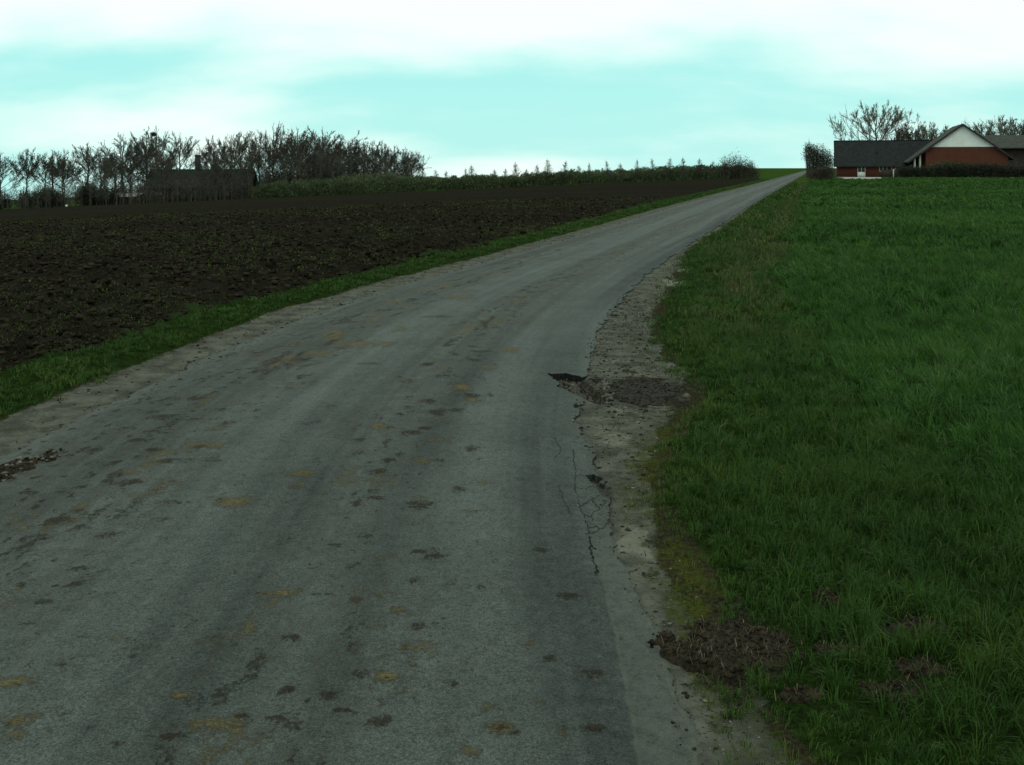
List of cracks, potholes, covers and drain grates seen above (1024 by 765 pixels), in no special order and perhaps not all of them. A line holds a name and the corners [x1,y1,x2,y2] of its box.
pothole [558,378,616,405]
crack [554,438,609,576]
